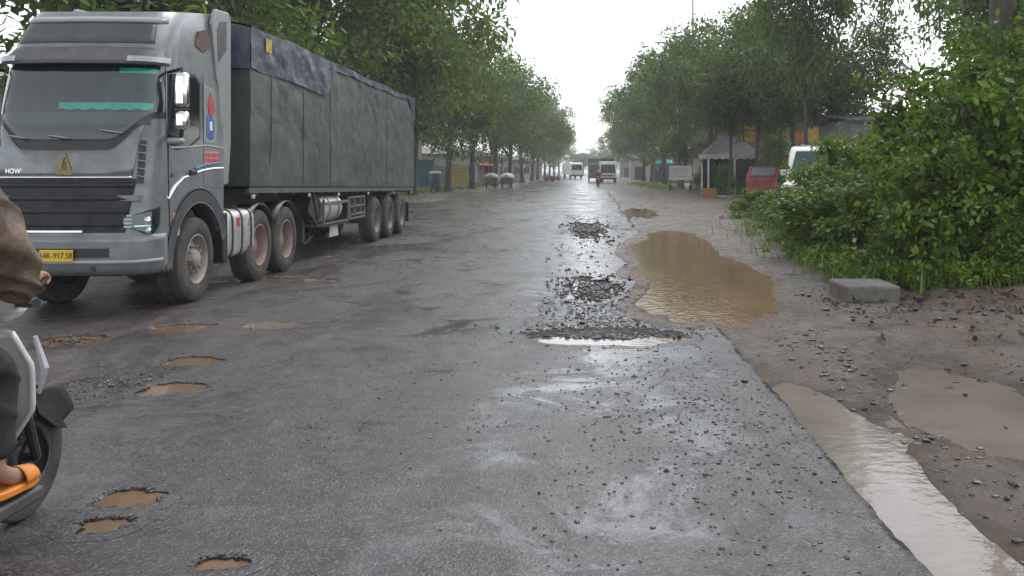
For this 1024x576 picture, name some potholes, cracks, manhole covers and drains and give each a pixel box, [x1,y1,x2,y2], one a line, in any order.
pothole [615,208,662,219]
pothole [614,229,794,330]
pothole [21,332,121,349]
pothole [47,508,158,543]
pothole [562,221,616,241]
pothole [64,480,192,516]
pothole [515,327,702,348]
pothole [165,545,277,576]
pothole [227,320,325,331]
pothole [136,322,229,336]
pothole [554,275,632,305]
pothole [146,353,239,368]
